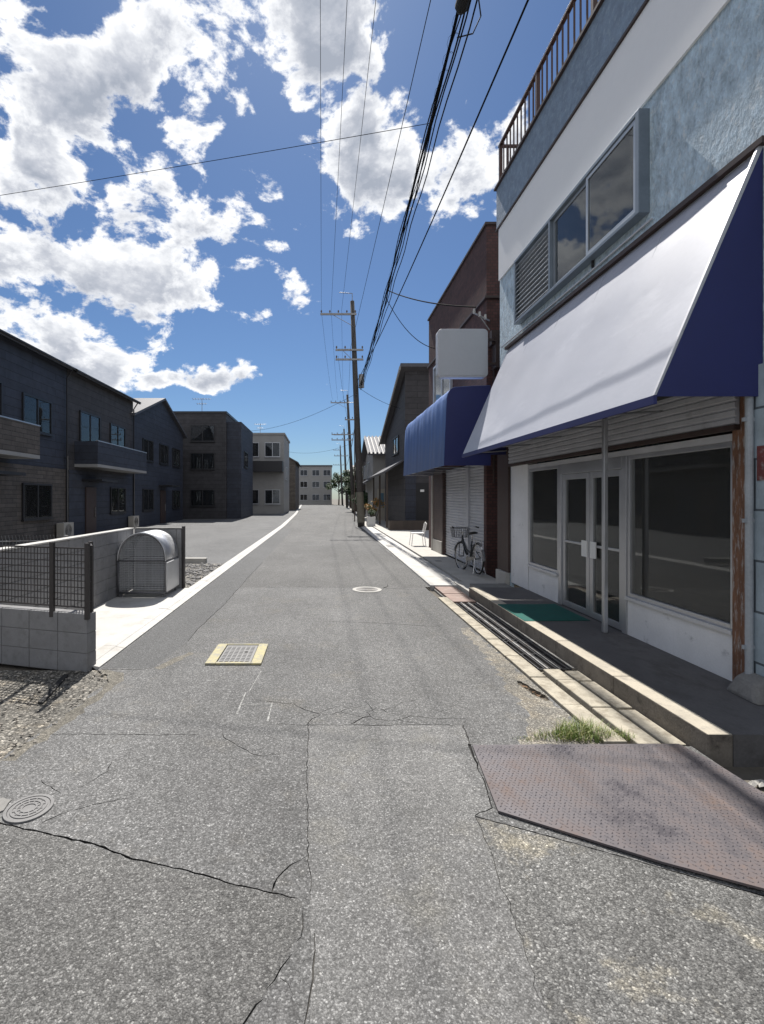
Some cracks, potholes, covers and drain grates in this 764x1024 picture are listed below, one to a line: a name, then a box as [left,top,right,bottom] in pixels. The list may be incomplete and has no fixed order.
drain grate [475,618,531,641]
crack [468,744,493,817]
crack [272,855,308,892]
drain grate [502,639,575,672]
crack [41,762,120,822]
drain grate [456,602,500,620]
crack [243,912,316,1024]
manhole cover [0,794,54,824]
crack [252,699,456,725]
